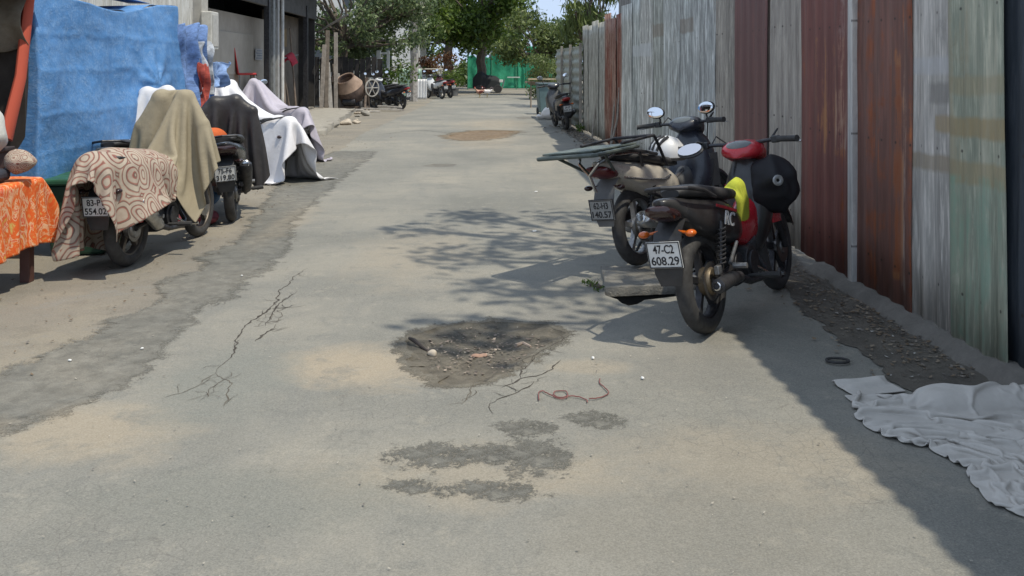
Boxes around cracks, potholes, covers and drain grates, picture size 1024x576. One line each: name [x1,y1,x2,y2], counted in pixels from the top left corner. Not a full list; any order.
crack [448,335,566,412]
pothole [388,316,575,389]
crack [169,269,305,405]
